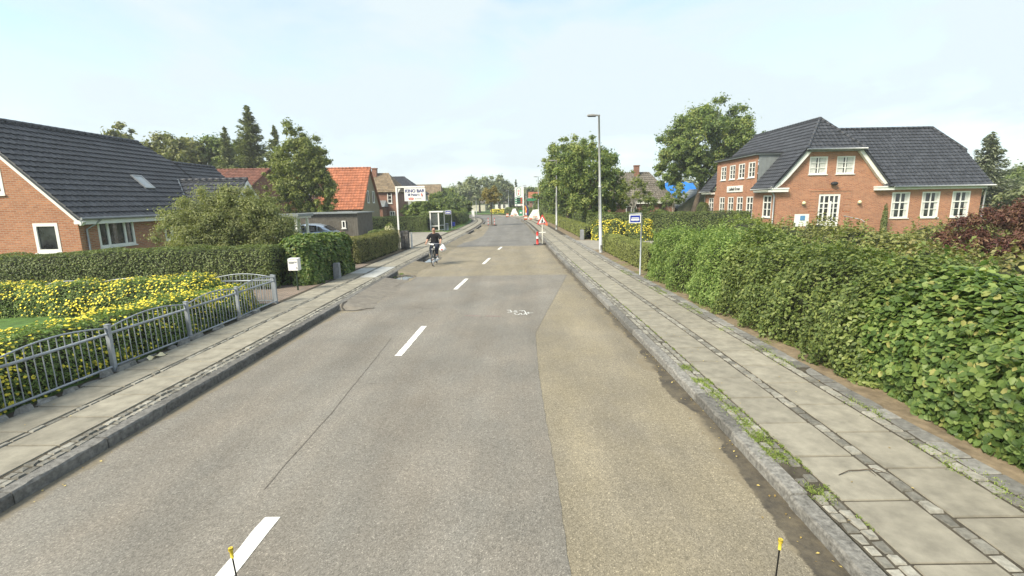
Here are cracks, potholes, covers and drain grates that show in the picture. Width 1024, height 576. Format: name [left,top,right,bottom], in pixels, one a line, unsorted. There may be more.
crack [265,339,391,488]
